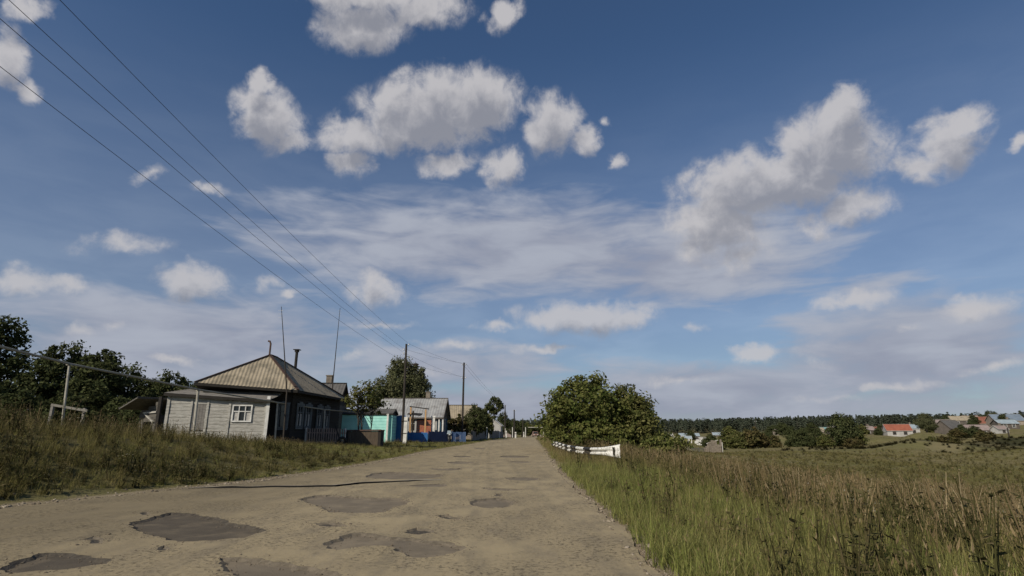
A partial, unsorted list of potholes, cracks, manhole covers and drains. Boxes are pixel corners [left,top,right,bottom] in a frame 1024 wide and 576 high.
crack [188,479,441,489]
